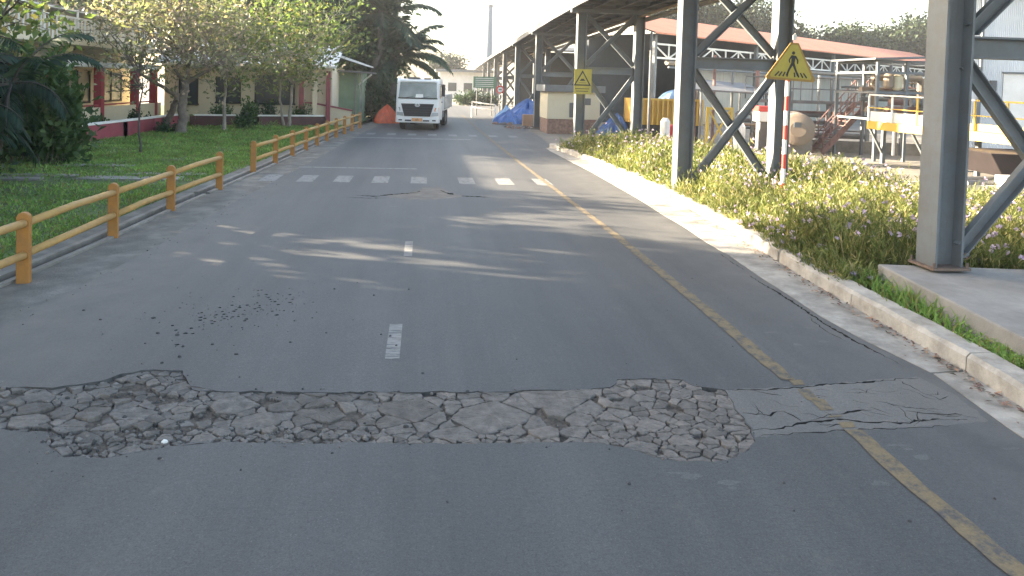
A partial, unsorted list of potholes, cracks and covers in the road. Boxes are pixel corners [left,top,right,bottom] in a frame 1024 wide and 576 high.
crack [725,378,975,436]
crack [721,254,896,362]
